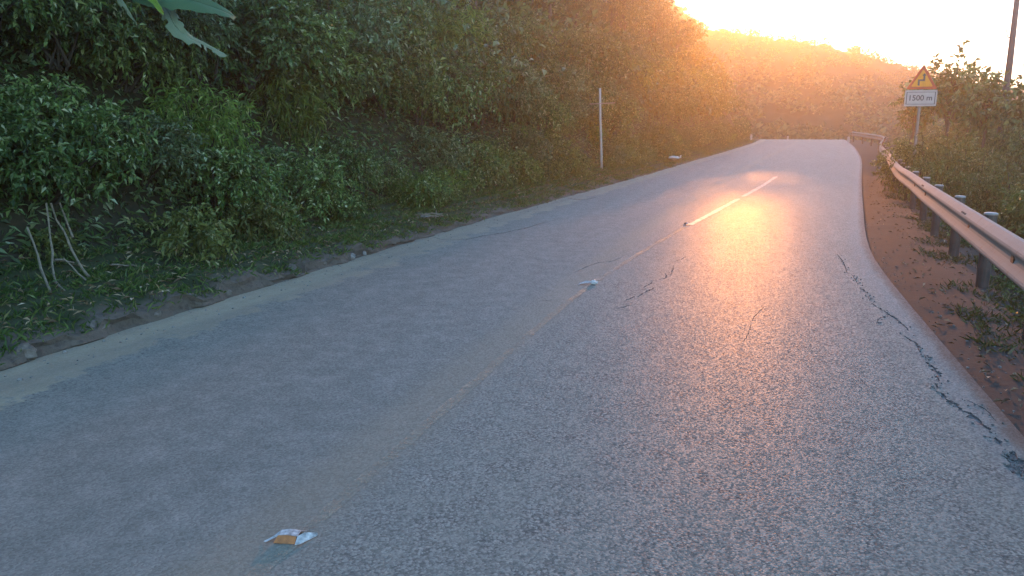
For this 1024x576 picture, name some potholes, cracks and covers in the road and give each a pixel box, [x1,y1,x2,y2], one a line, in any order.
crack [617,260,678,309]
crack [837,254,1009,450]
